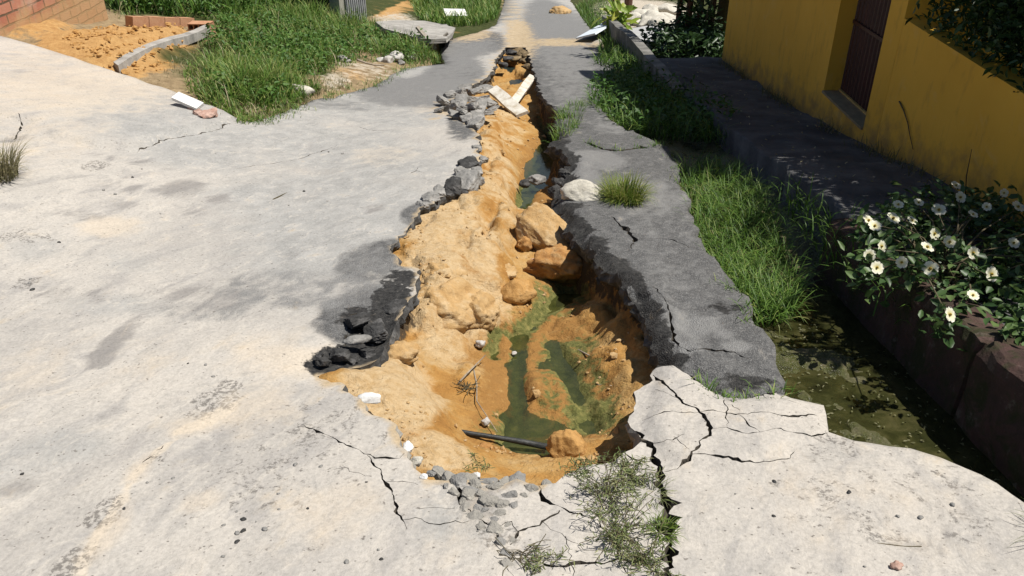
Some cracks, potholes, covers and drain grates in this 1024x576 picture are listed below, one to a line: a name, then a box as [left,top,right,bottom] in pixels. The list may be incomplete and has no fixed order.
crack [627,375,825,576]
crack [654,287,749,359]
pothole [318,47,661,486]
crack [304,425,633,576]
crack [612,217,689,249]
crack [585,142,647,151]
